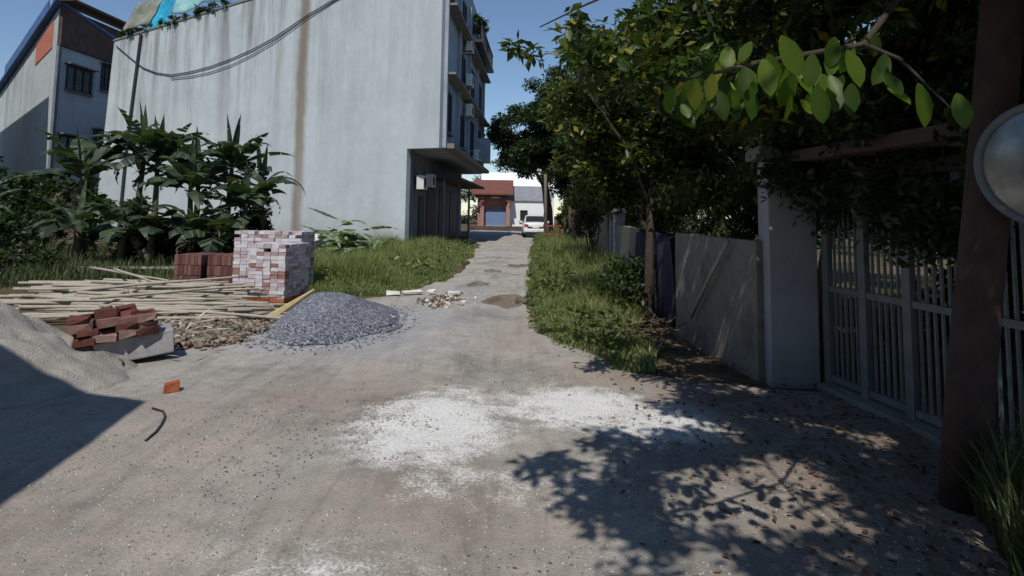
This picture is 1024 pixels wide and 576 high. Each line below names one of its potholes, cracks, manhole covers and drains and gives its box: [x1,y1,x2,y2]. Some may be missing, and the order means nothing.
pothole [481,294,527,309]
